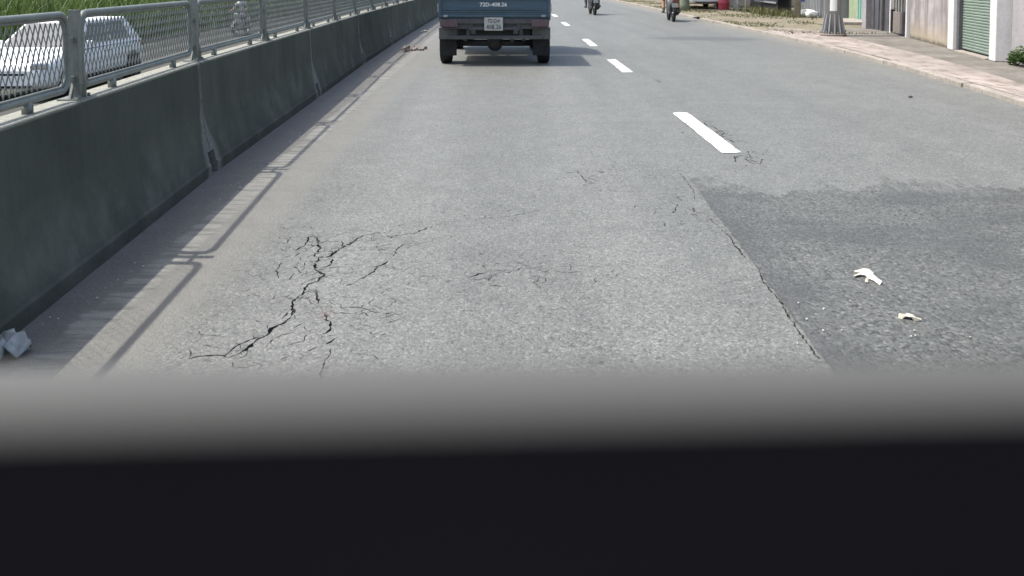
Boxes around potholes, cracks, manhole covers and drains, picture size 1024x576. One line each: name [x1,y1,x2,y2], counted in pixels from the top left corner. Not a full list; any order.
crack [456,252,617,292]
crack [557,169,820,359]
